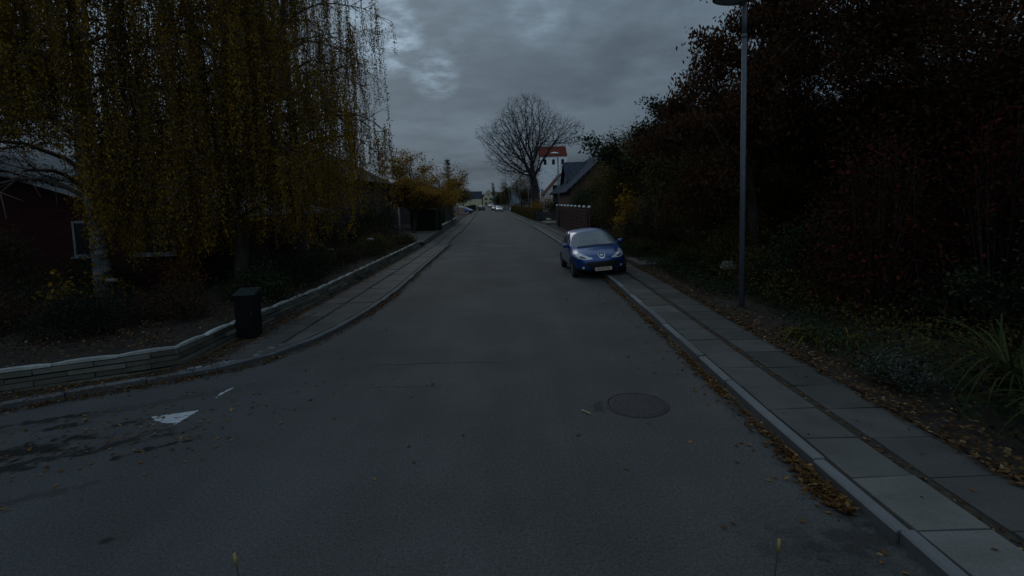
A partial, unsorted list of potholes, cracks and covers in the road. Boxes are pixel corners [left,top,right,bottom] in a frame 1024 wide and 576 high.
manhole cover [605,392,669,418]
